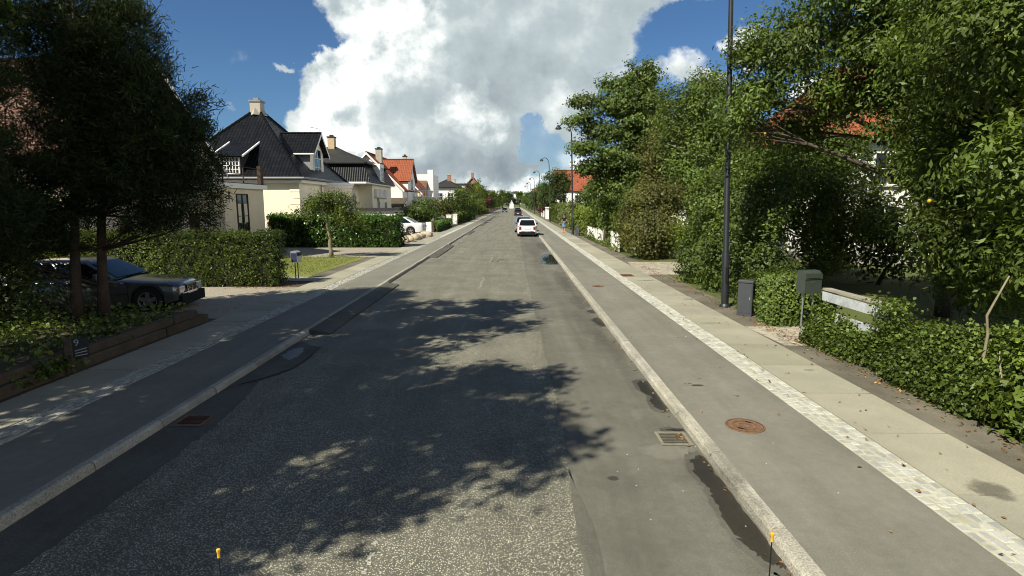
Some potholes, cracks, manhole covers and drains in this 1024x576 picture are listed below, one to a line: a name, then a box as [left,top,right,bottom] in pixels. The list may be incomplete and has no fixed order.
drain grate [654,431,693,445]
manhole cover [725,418,765,434]
drain grate [170,414,216,426]
